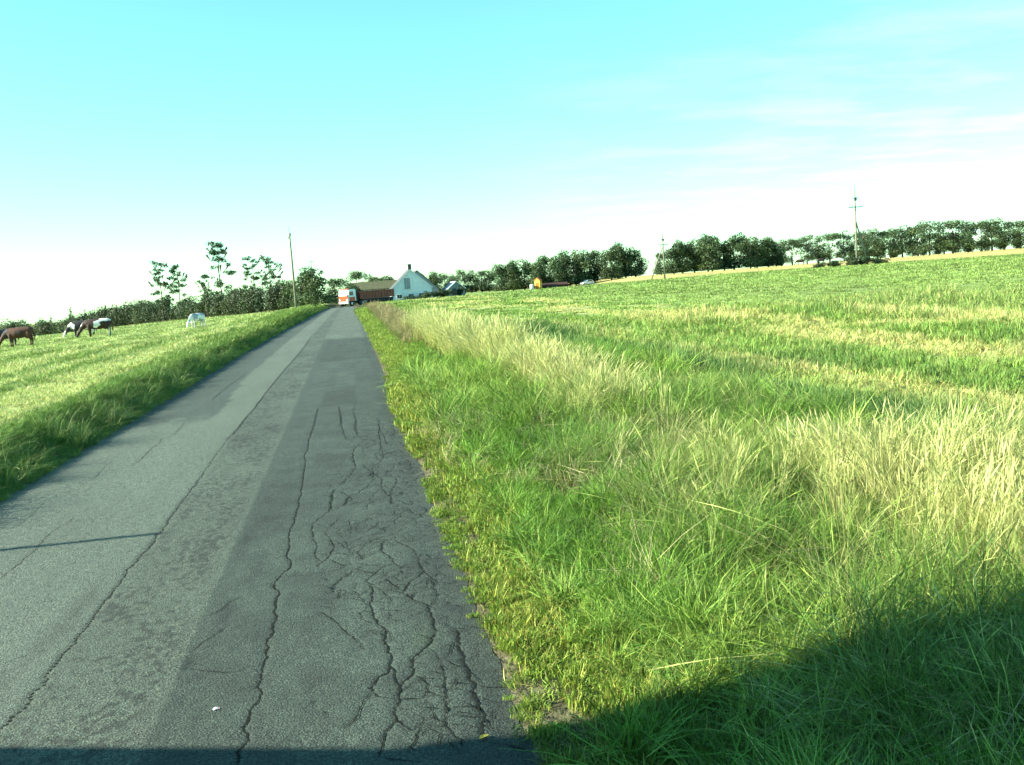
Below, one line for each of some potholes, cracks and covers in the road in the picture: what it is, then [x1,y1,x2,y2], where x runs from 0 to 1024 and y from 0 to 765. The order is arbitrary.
crack [189,408,340,764]
crack [310,399,530,762]
